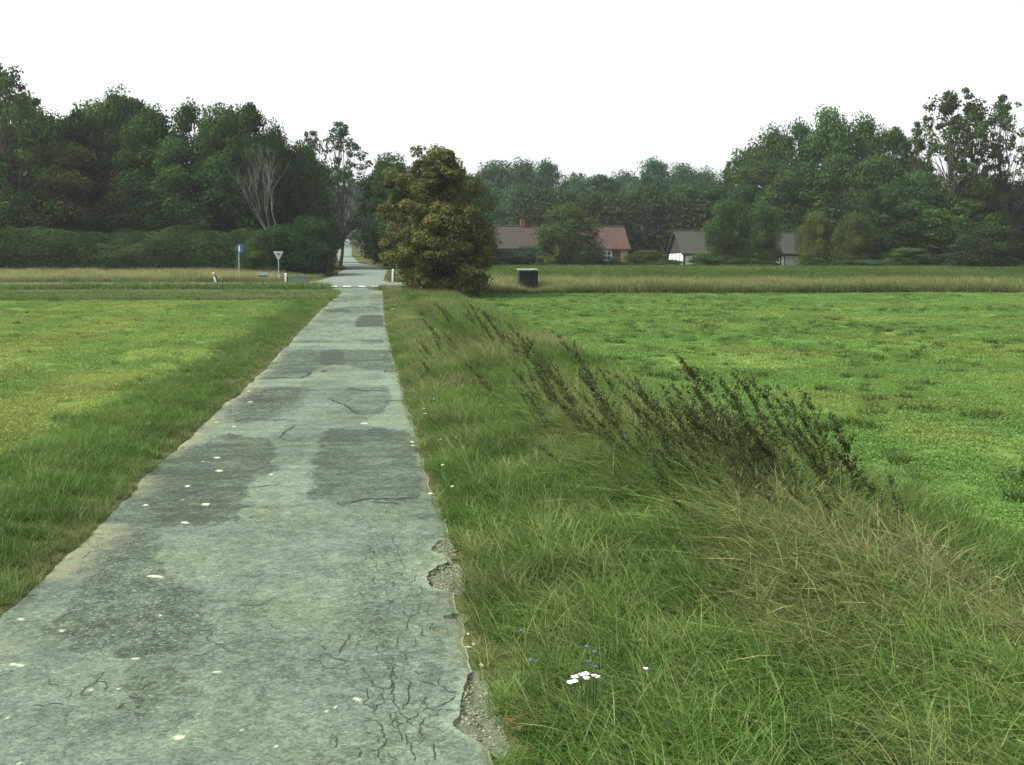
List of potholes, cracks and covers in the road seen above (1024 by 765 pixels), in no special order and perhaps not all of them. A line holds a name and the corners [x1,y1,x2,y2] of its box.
pothole [430,540,458,558]
pothole [453,670,511,759]
crack [327,387,402,414]
pothole [426,562,466,595]
crack [236,387,300,438]
crack [292,497,458,761]
